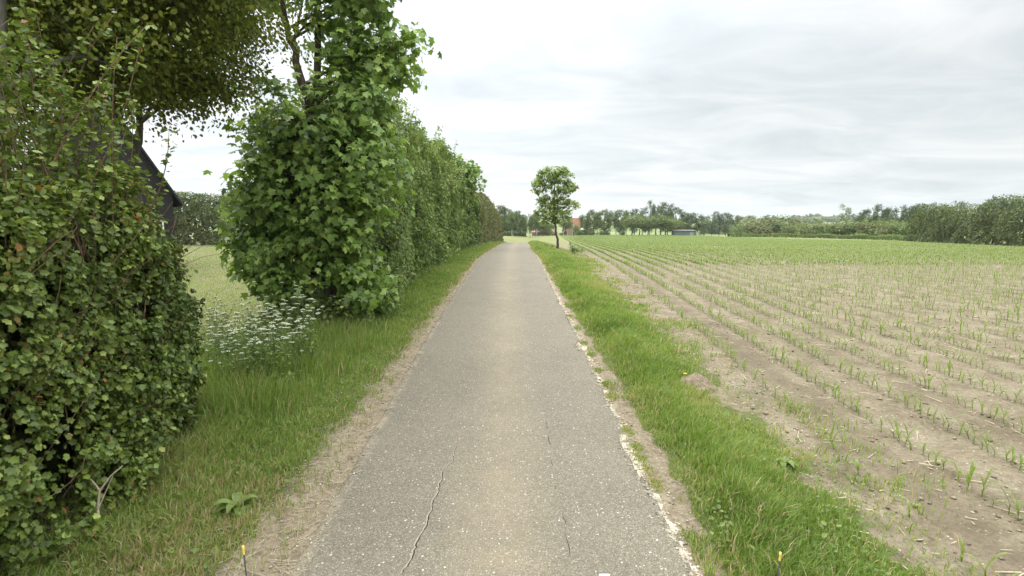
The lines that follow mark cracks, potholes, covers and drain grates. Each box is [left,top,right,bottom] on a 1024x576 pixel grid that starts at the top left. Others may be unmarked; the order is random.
crack [398,442,457,575]
